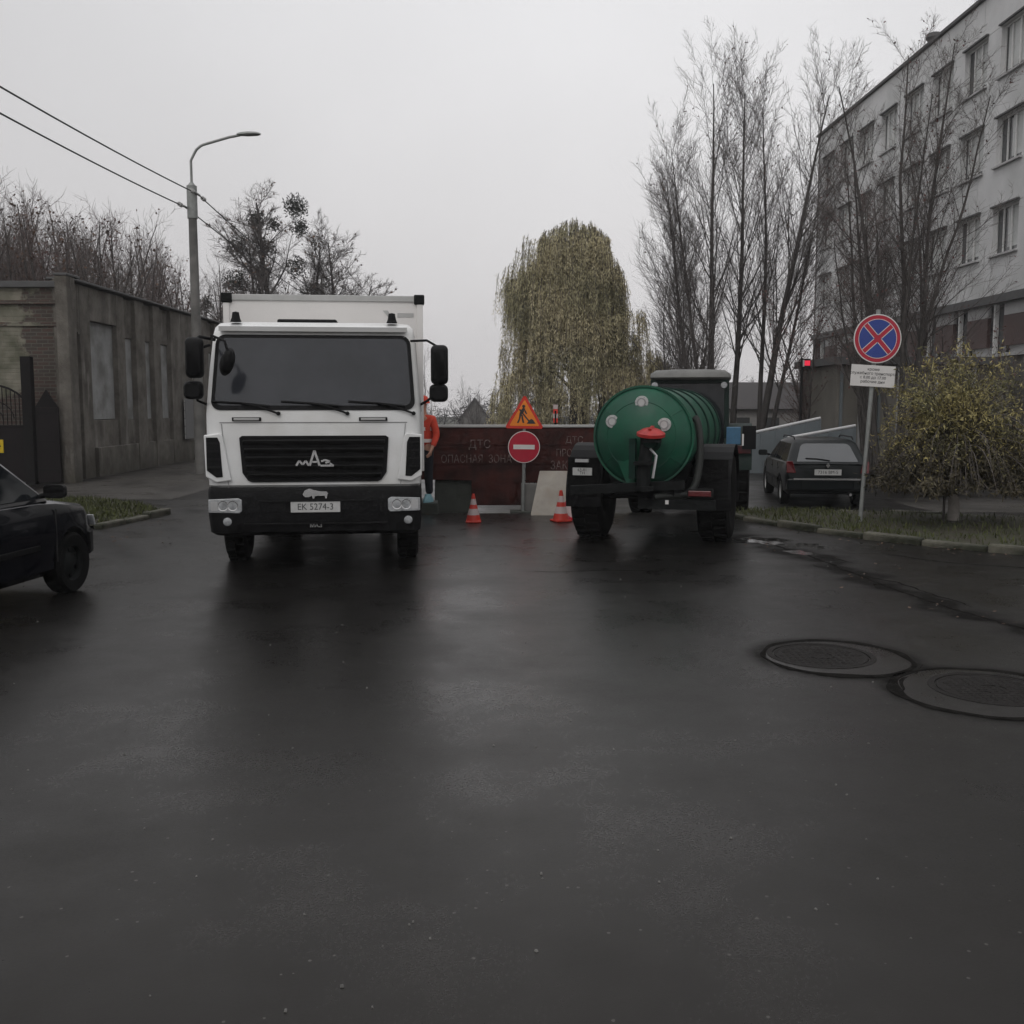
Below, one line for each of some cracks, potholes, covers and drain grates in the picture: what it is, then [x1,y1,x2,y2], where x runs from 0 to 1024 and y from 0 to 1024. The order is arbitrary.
manhole cover [886,667,1024,721]
manhole cover [760,639,917,678]
crack [882,553,1023,568]
